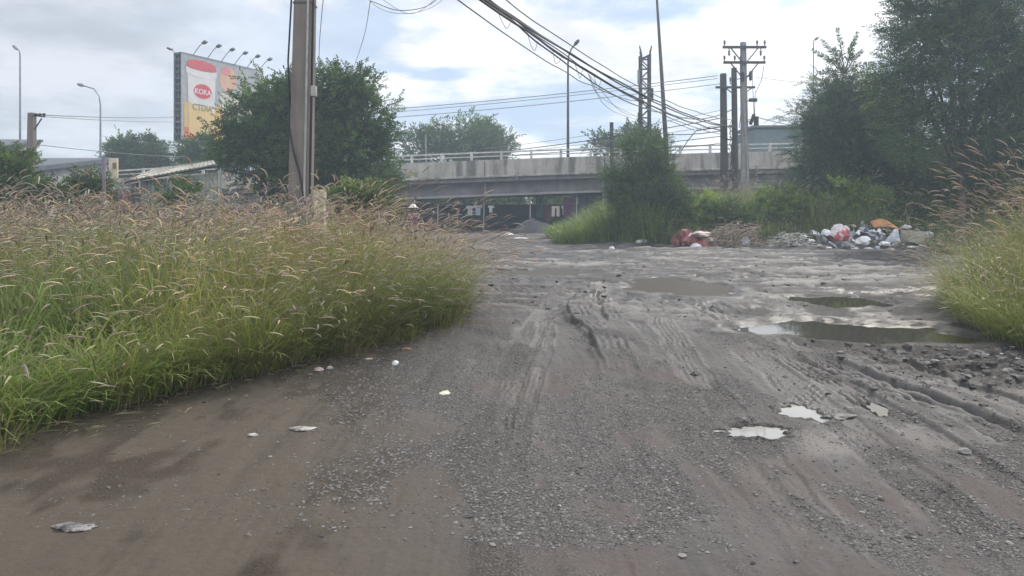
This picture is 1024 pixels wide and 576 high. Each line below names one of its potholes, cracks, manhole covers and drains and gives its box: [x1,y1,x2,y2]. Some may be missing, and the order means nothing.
pothole [765,293,925,310]
pothole [607,275,751,299]
pothole [768,400,843,426]
pothole [861,400,895,418]
pothole [708,420,797,441]
pothole [703,315,1015,348]
